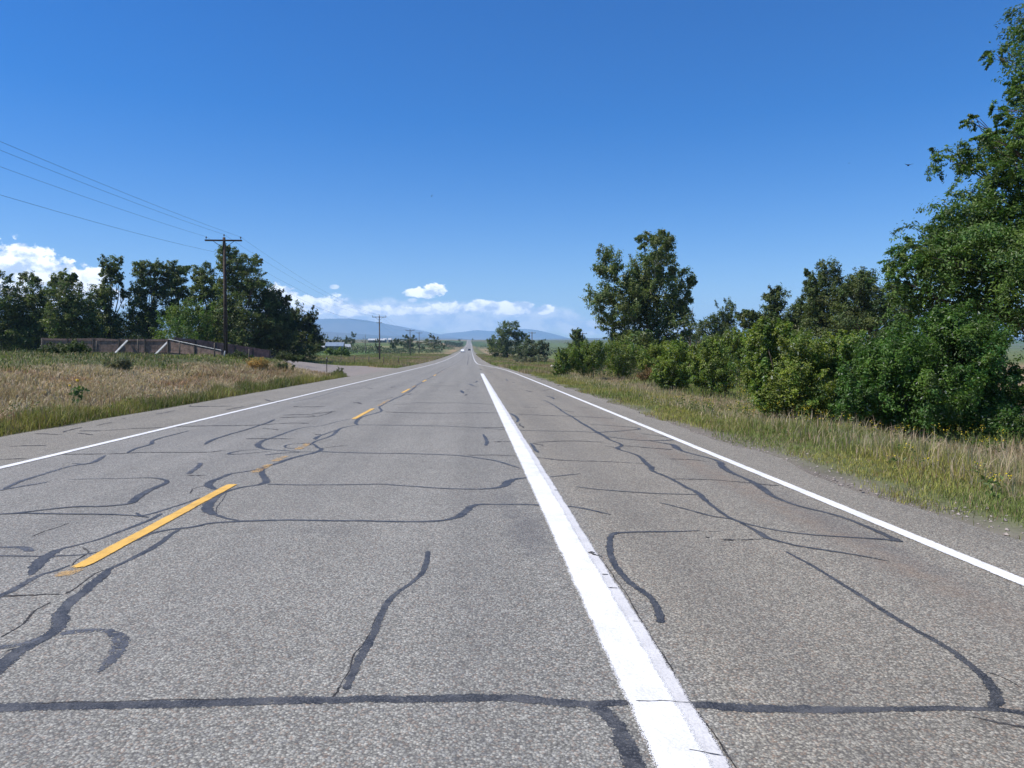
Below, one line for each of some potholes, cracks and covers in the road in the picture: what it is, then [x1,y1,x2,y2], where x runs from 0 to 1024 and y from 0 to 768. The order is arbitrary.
crack [0,422,134,460]
crack [154,399,333,439]
